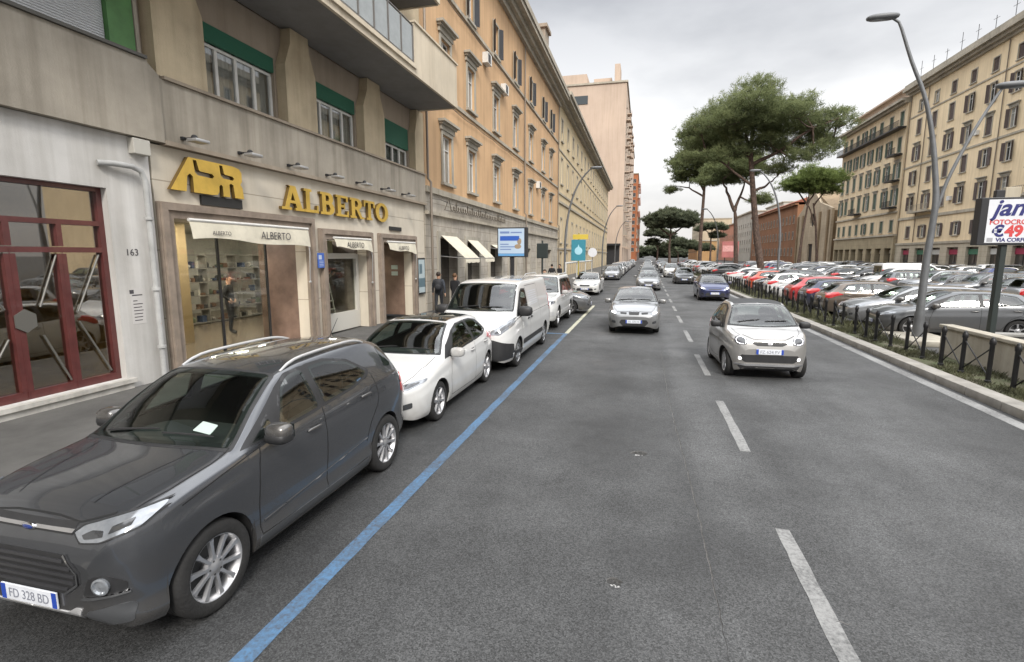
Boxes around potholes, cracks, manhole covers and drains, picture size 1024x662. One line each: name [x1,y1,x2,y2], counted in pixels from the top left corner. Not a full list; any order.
pothole [606,577,623,588]
